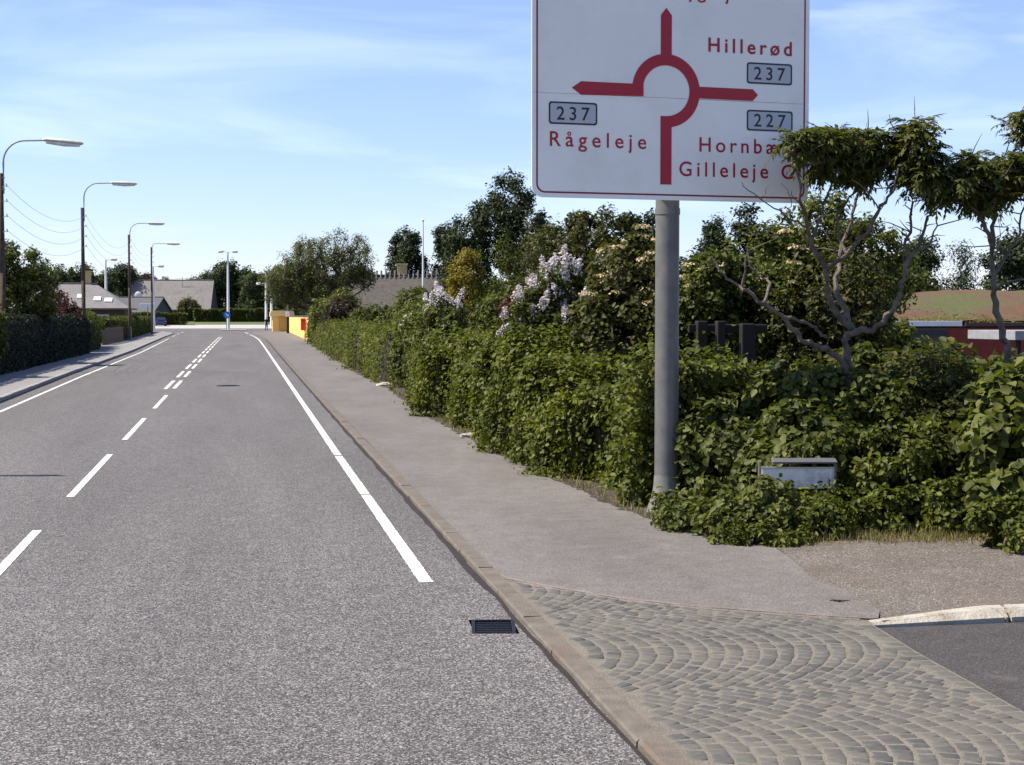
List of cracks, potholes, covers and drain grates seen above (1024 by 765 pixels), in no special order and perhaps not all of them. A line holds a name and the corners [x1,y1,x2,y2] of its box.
drain grate [471,619,517,634]
